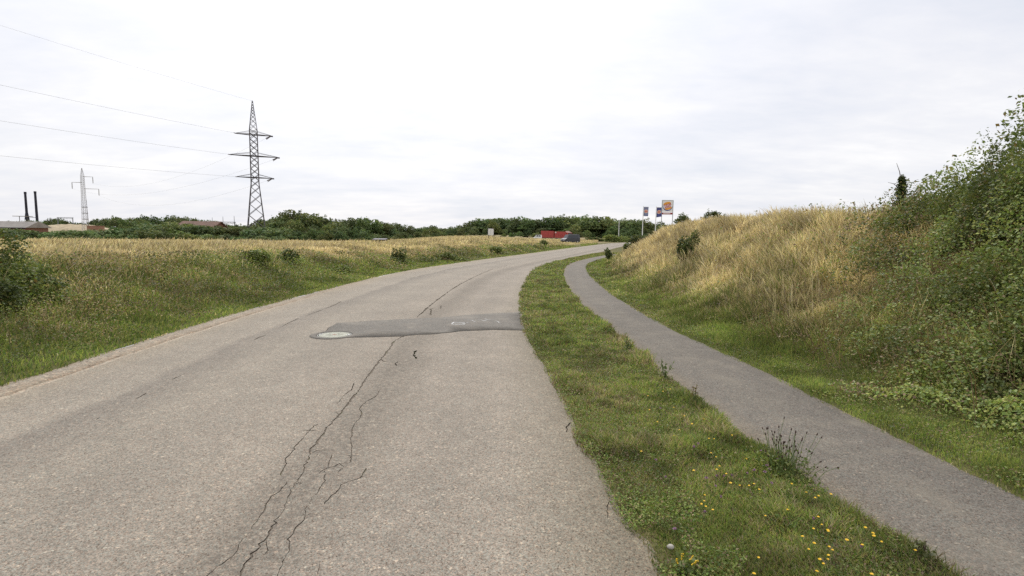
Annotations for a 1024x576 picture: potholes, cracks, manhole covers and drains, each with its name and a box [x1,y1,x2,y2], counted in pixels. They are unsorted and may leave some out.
crack [207,336,417,576]
